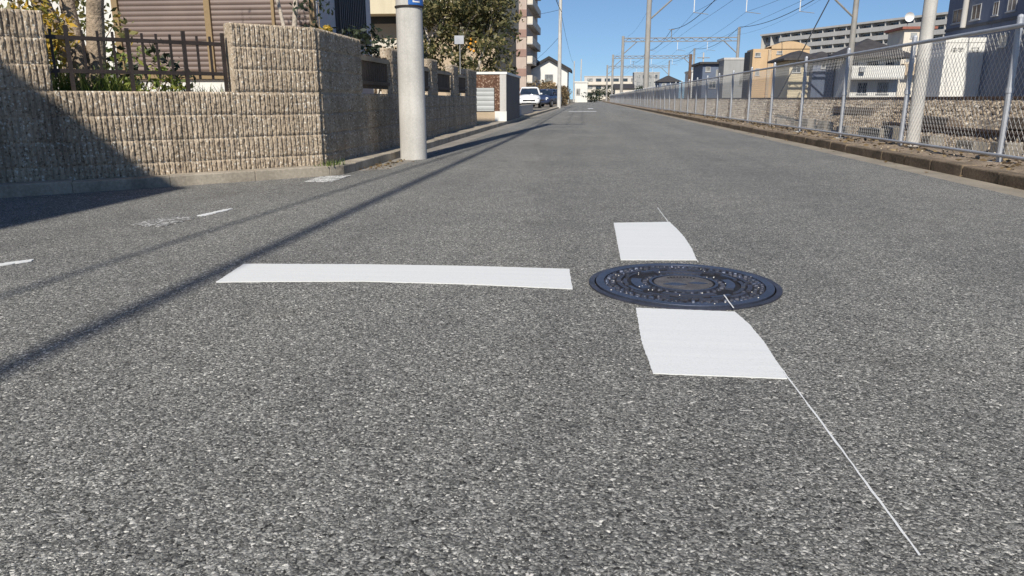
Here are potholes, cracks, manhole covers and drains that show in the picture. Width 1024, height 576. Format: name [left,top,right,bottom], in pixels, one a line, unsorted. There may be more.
manhole cover [589,263,783,311]
